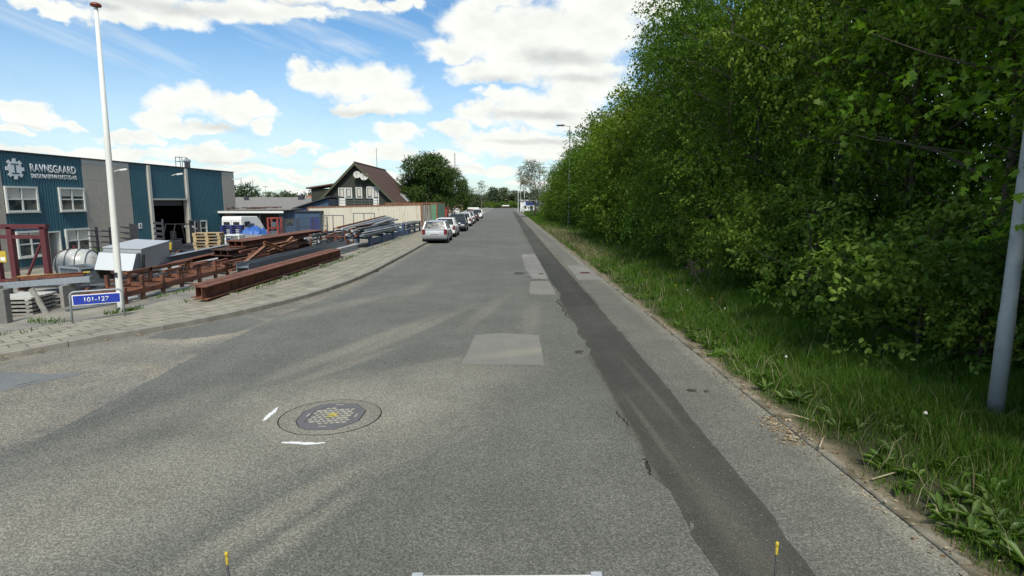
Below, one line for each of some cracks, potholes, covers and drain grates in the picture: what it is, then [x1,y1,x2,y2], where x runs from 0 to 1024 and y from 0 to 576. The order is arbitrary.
manhole cover [277,399,382,435]
crack [642,458,652,476]
